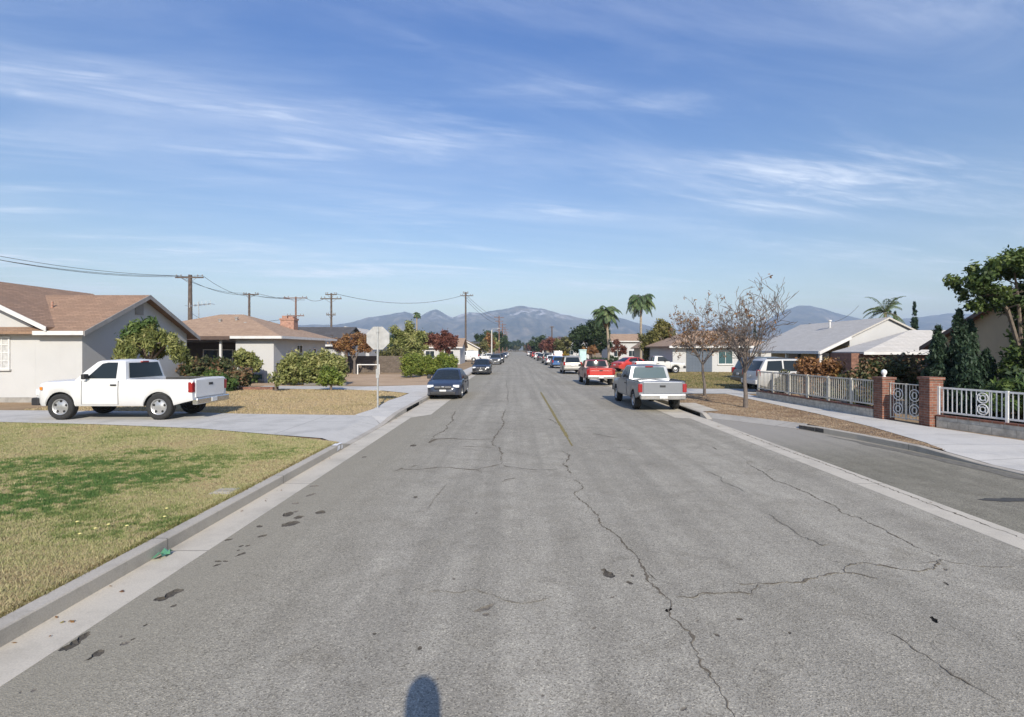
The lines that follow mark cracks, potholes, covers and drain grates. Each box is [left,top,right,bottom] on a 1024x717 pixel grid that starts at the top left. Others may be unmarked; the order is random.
crack [398,383,1014,717]
